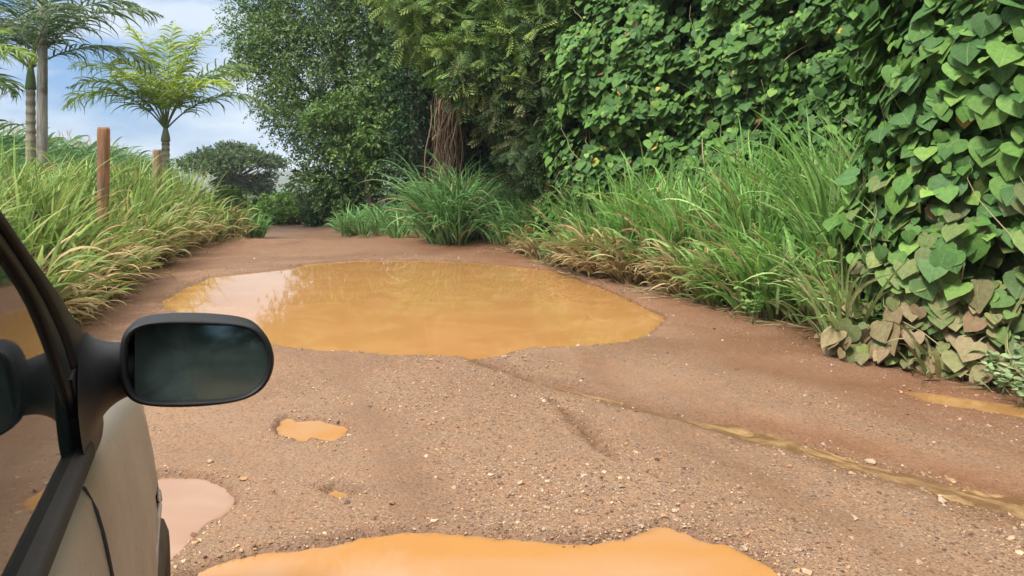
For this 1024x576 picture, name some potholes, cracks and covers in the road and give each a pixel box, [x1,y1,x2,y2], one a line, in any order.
pothole [266,411,359,443]
pothole [171,513,805,576]
pothole [311,479,366,501]
pothole [156,466,252,565]
pothole [892,386,1024,419]
pothole [143,258,681,365]
